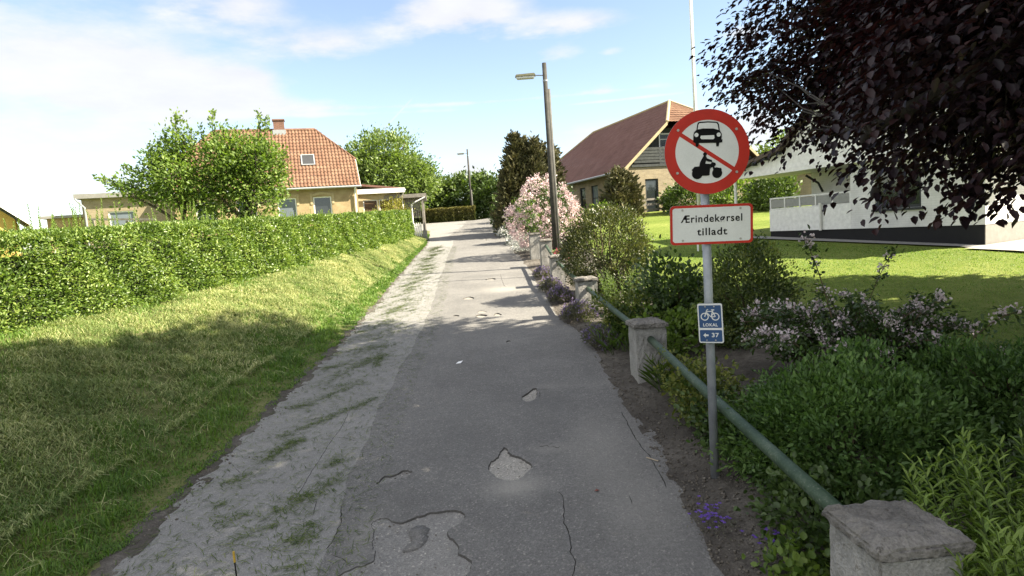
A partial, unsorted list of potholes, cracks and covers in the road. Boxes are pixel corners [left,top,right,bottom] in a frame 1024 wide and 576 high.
pothole [338,510,472,576]
pothole [522,388,537,402]
pothole [488,447,532,481]
crack [559,492,576,576]
crack [621,412,667,488]
